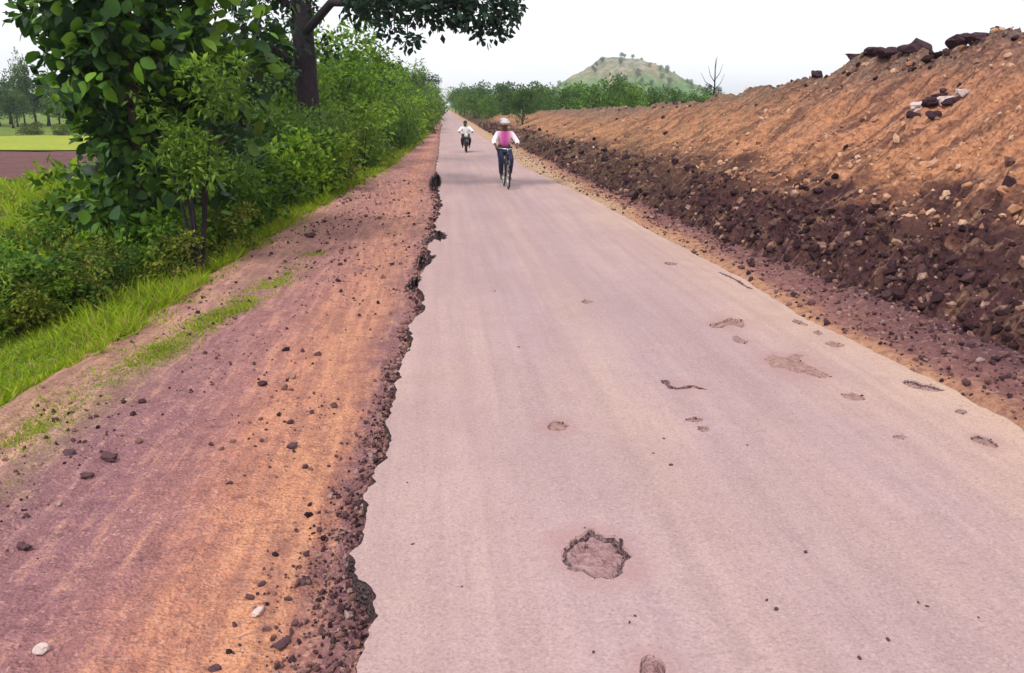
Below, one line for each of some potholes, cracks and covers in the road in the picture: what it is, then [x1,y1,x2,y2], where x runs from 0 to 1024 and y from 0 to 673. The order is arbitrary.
pothole [970,435,999,448]
pothole [901,380,944,392]
crack [660,380,707,390]
crack [718,272,753,289]
pothole [561,528,632,579]
pothole [765,353,833,379]
pothole [547,421,568,431]
pothole [639,655,666,673]
pothole [710,318,746,328]
